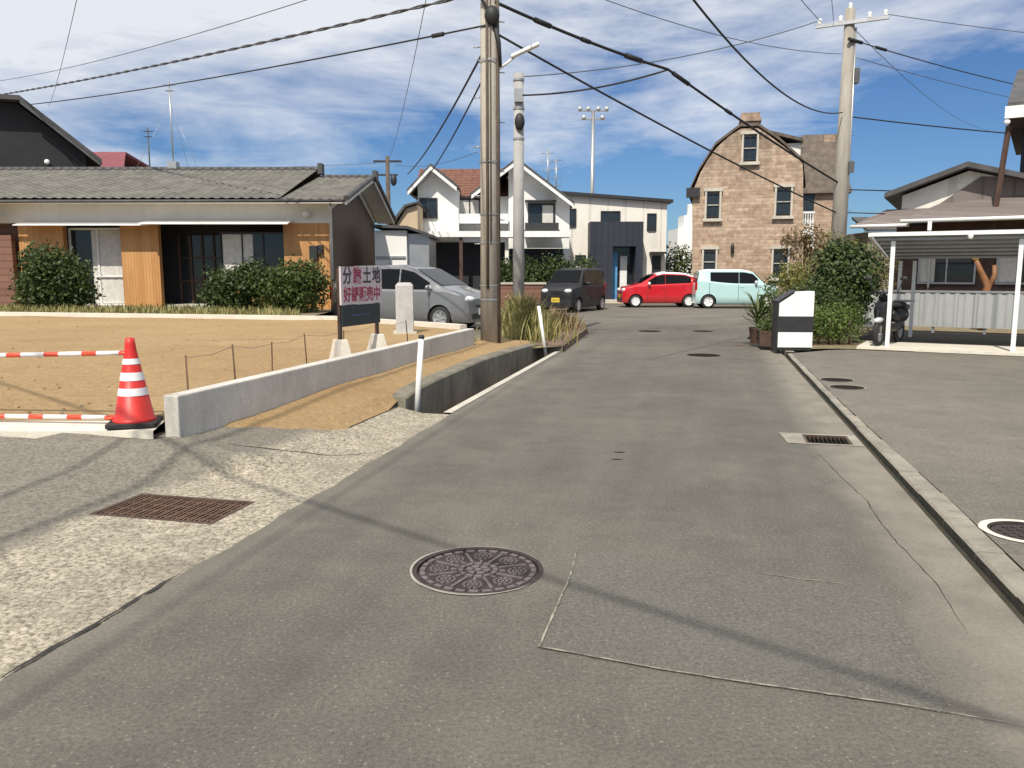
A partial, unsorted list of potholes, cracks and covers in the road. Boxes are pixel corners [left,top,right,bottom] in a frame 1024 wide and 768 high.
crack [538,550,1023,725]
drain grate [89,493,255,524]
manhole cover [410,546,544,595]
manhole cover [978,519,1024,543]
drain grate [779,432,865,447]
crack [821,456,968,633]
